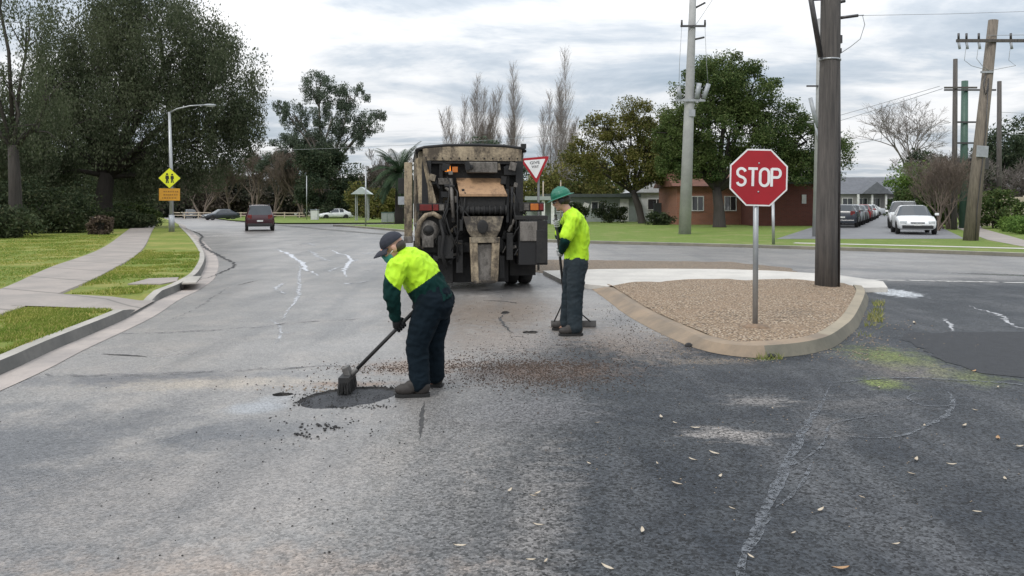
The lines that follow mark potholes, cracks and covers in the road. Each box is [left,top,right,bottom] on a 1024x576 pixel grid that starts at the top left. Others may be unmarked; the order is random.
crack [484,300,521,337]
pothole [297,386,396,409]
